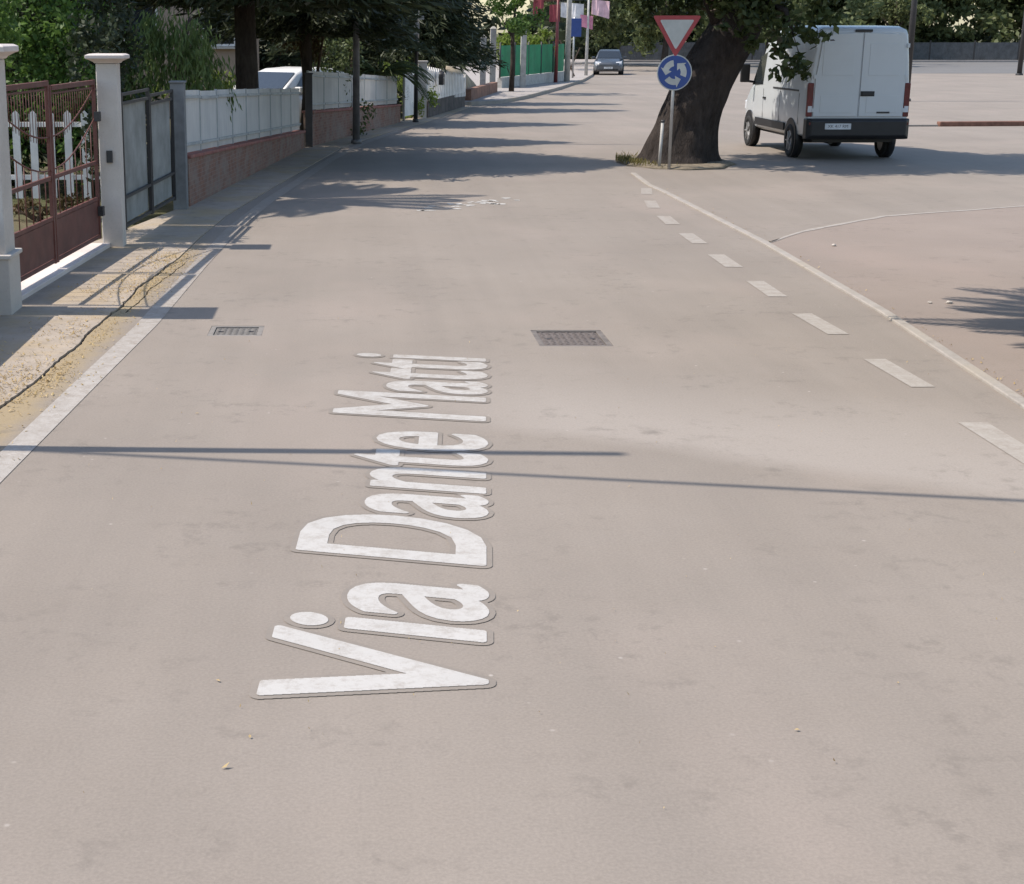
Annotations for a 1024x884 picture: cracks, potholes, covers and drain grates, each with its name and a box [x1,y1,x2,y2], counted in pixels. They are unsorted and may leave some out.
manhole cover [531,330,613,346]
